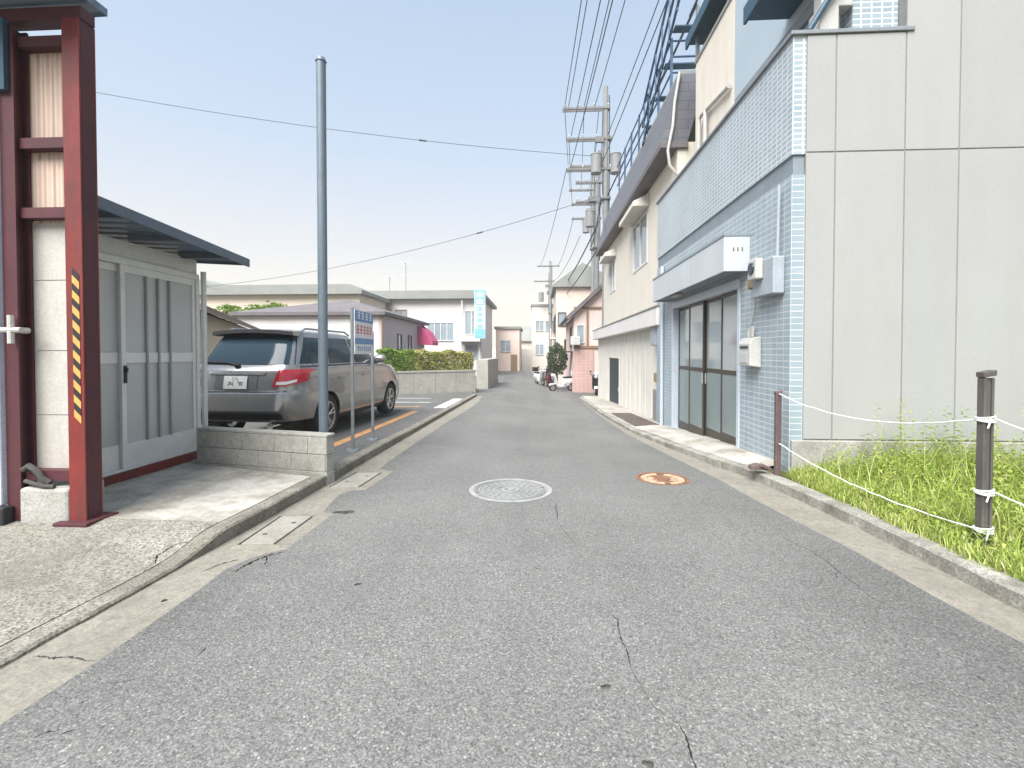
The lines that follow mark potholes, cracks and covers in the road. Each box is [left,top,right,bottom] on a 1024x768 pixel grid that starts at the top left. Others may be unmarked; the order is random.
manhole cover [469,479,552,502]
crack [780,536,893,608]
manhole cover [635,472,690,486]
crack [204,552,284,572]
crack [601,606,697,768]
